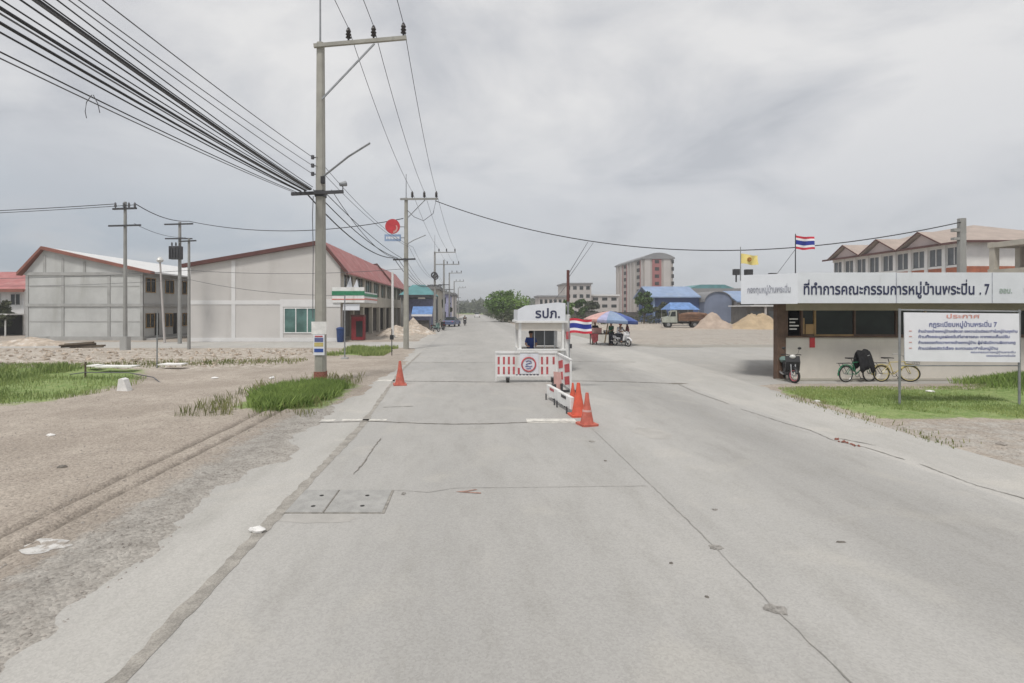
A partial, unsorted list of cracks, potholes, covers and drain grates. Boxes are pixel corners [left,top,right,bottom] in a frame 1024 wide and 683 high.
manhole cover [323,490,394,514]
manhole cover [284,490,340,514]
crack [343,406,543,473]
